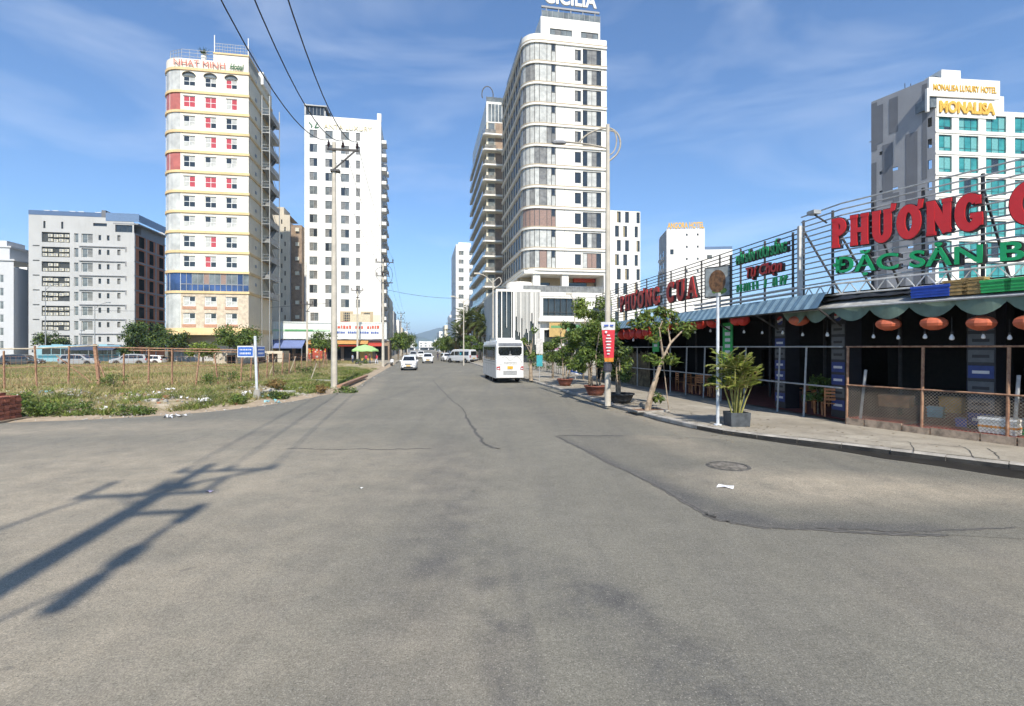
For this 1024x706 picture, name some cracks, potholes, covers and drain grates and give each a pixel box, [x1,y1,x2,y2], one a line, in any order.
crack [433,380,500,449]
manhole cover [705,461,751,471]
